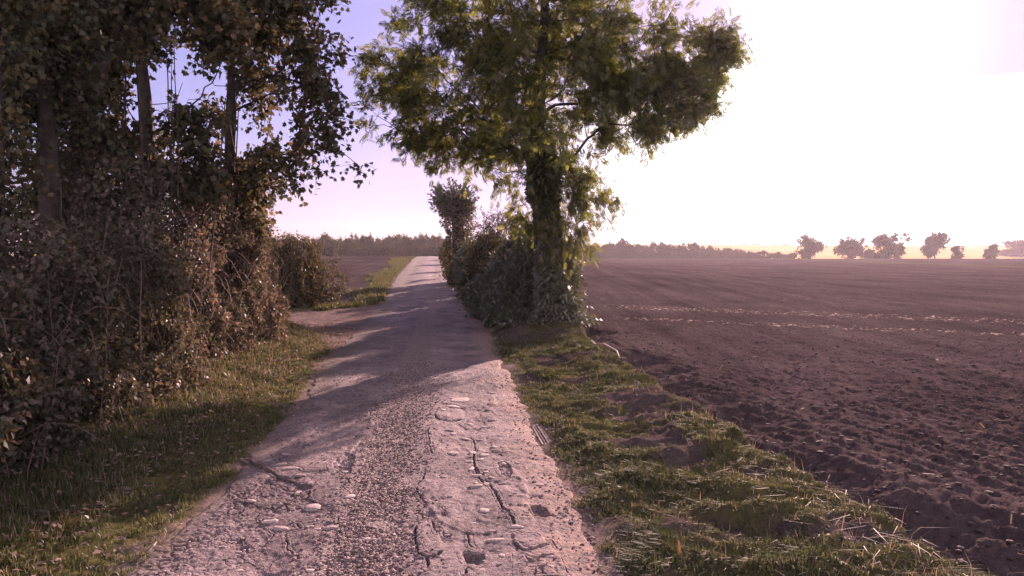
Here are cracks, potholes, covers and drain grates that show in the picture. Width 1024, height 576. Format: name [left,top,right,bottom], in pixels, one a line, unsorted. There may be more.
pothole [523,503,555,519]
pothole [493,460,517,480]
crack [410,402,573,576]
crack [124,443,353,576]
pothole [456,549,492,568]
